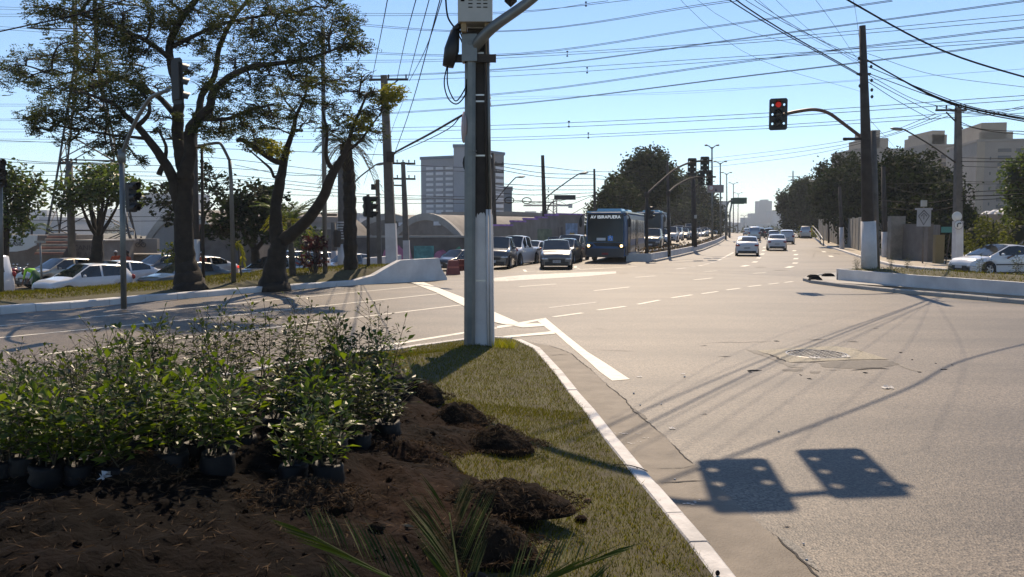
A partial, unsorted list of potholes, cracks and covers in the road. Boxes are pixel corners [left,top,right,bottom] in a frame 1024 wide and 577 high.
manhole cover [785,349,848,358]
crack [769,526,819,577]
